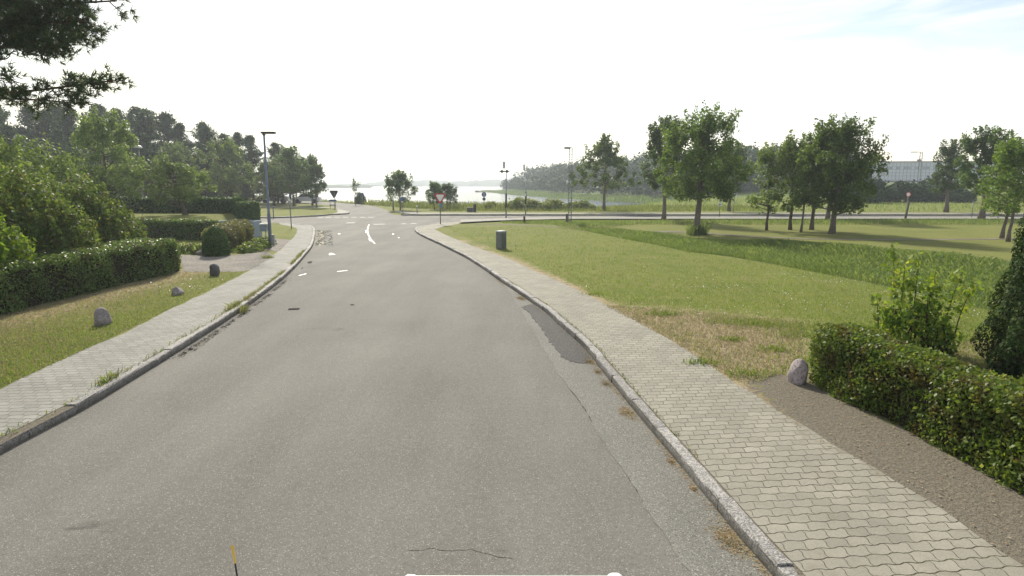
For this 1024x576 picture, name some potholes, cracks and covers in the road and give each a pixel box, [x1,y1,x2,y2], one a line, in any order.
crack [407,548,512,559]
